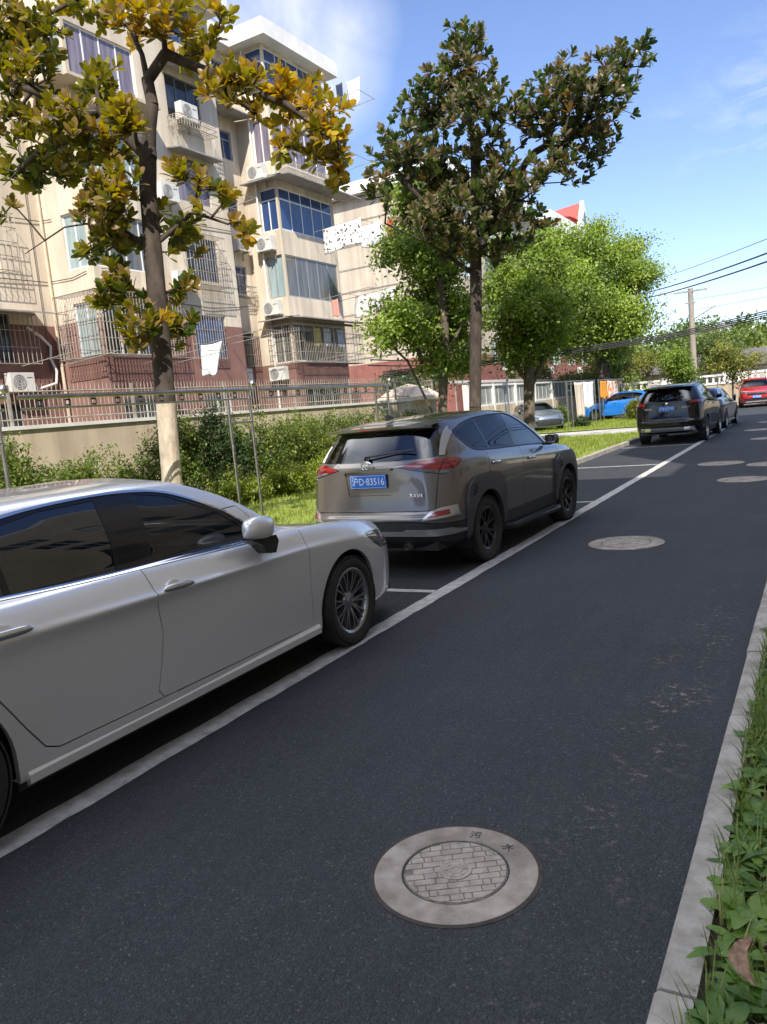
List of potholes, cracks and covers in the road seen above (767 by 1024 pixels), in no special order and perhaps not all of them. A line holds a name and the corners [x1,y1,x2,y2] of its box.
manhole cover [587,536,666,550]
manhole cover [370,825,543,929]
